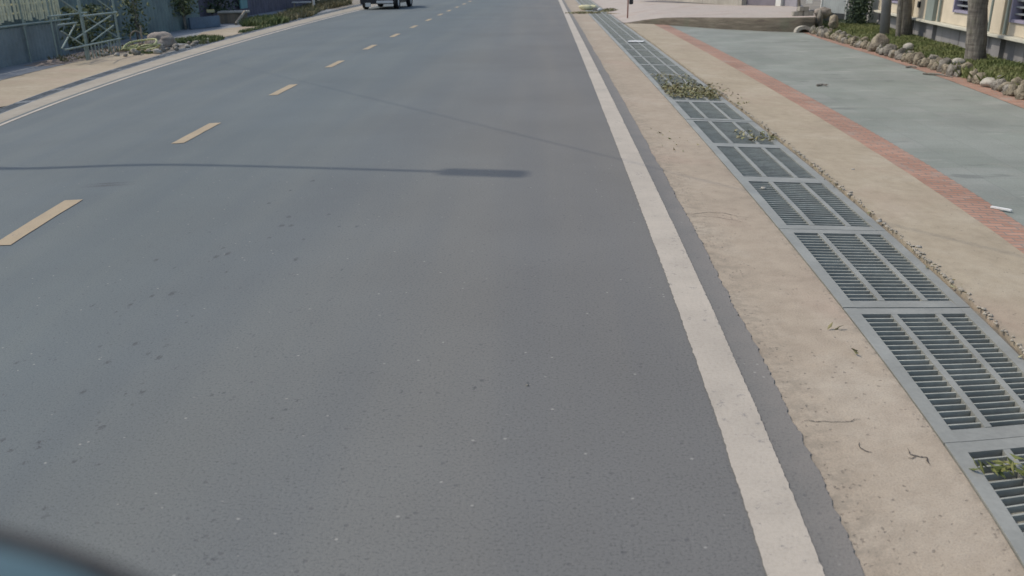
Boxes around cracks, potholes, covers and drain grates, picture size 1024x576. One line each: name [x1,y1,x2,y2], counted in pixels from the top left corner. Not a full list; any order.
drain grate [628,56,679,65]
drain grate [636,64,693,75]
drain grate [944,437,1024,569]
drain grate [685,119,785,147]
drain grate [843,308,1024,445]
drain grate [737,178,886,231]
drain grate [707,144,827,181]
drain grate [655,86,728,102]
drain grate [645,74,707,87]
drain grate [779,229,970,309]
drain grate [669,100,753,122]
